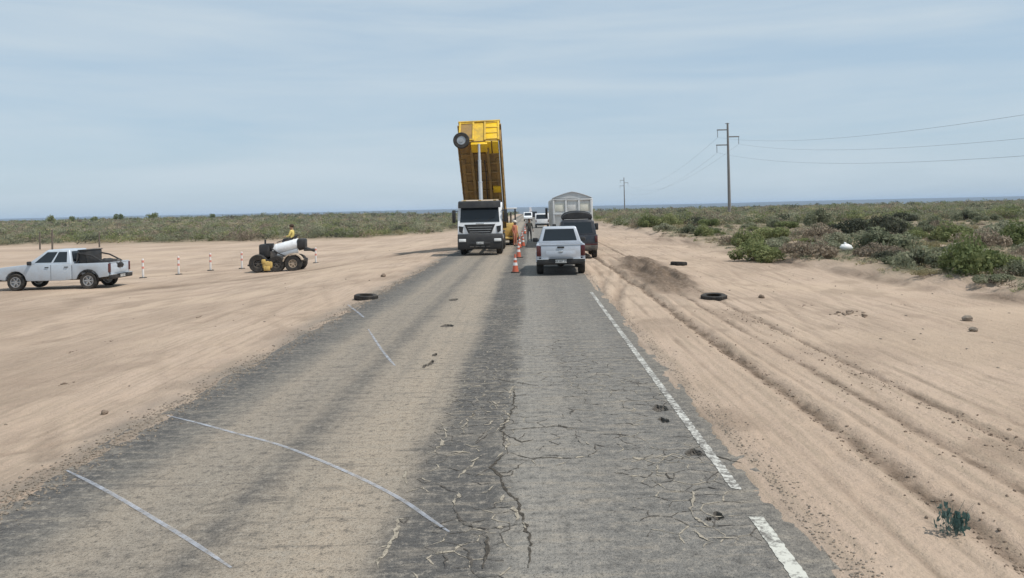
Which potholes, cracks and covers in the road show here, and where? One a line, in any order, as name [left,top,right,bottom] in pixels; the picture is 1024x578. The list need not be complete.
crack [376,471,408,566]
crack [402,307,762,578]
